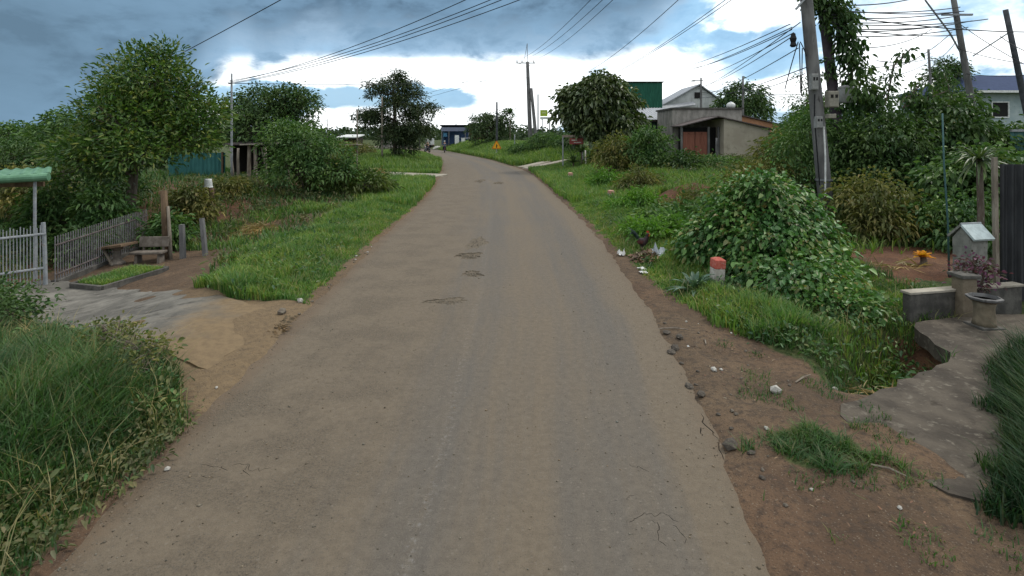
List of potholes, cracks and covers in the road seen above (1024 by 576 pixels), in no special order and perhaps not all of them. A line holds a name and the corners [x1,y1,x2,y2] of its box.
pothole [421,297,467,305]
pothole [464,236,489,250]
crack [627,466,686,546]
